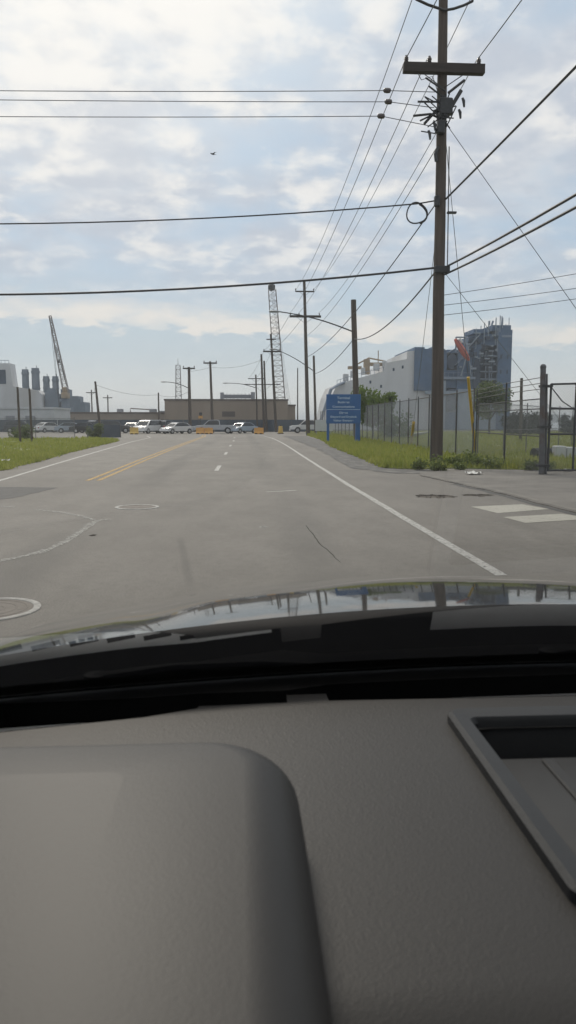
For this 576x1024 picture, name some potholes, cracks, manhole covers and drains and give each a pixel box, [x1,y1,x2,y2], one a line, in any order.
manhole cover [0,597,41,621]
